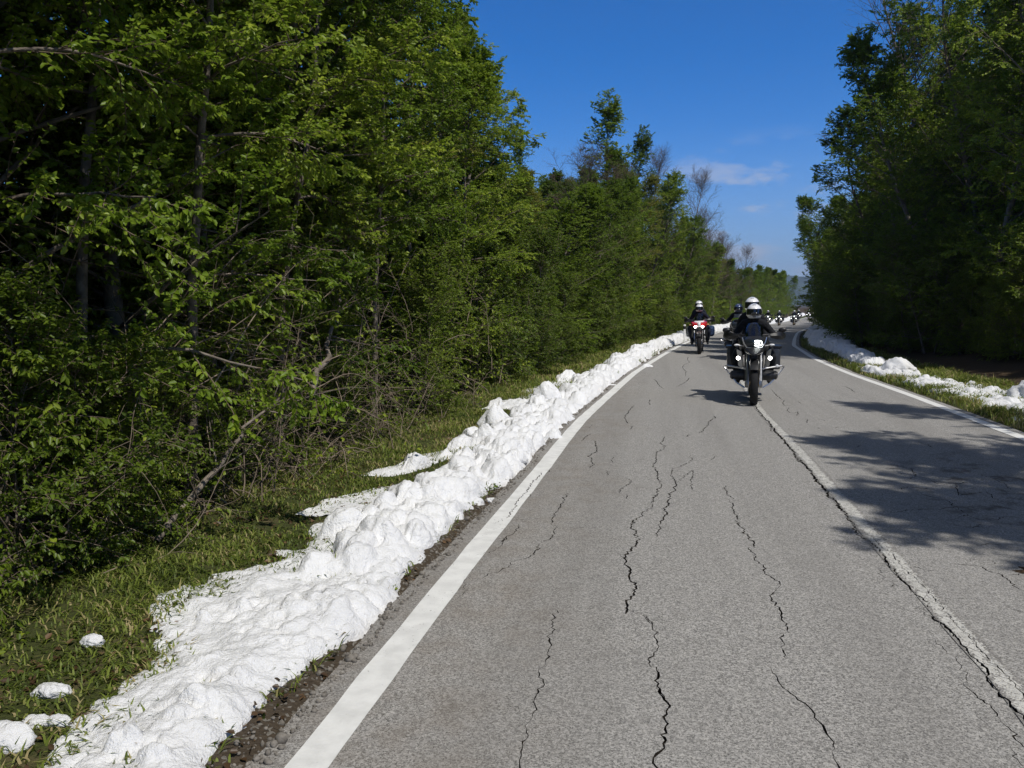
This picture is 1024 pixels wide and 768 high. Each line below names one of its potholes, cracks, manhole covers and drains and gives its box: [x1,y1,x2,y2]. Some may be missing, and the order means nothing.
crack [755,390,1024,763]
crack [725,488,840,768]
crack [620,437,693,768]
crack [487,495,567,576]
crack [519,611,559,768]
